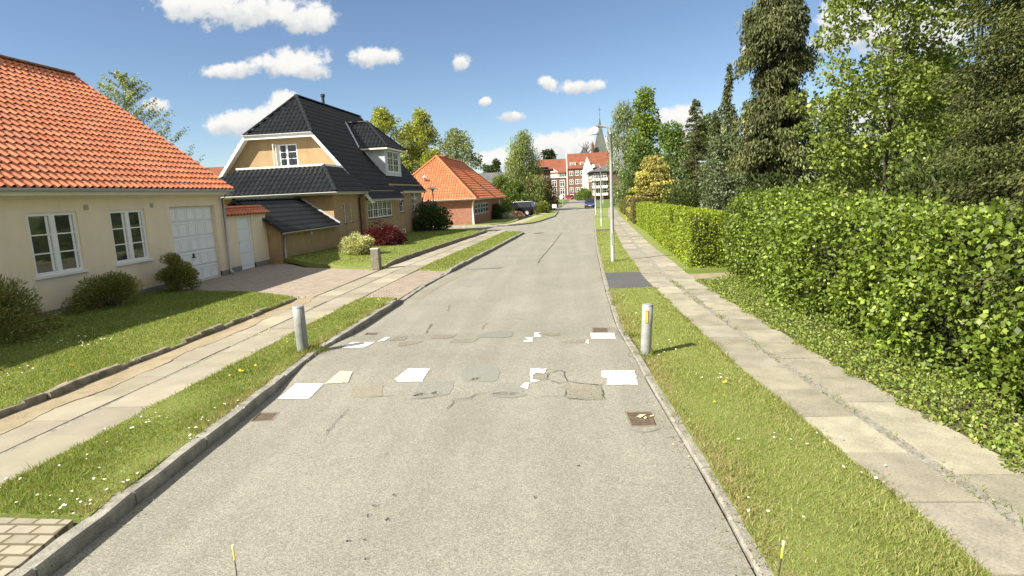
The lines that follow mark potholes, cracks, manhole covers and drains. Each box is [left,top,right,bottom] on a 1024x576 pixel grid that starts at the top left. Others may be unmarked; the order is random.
drain grate [625,410,659,427]
crack [547,370,605,400]
drain grate [249,412,279,422]
